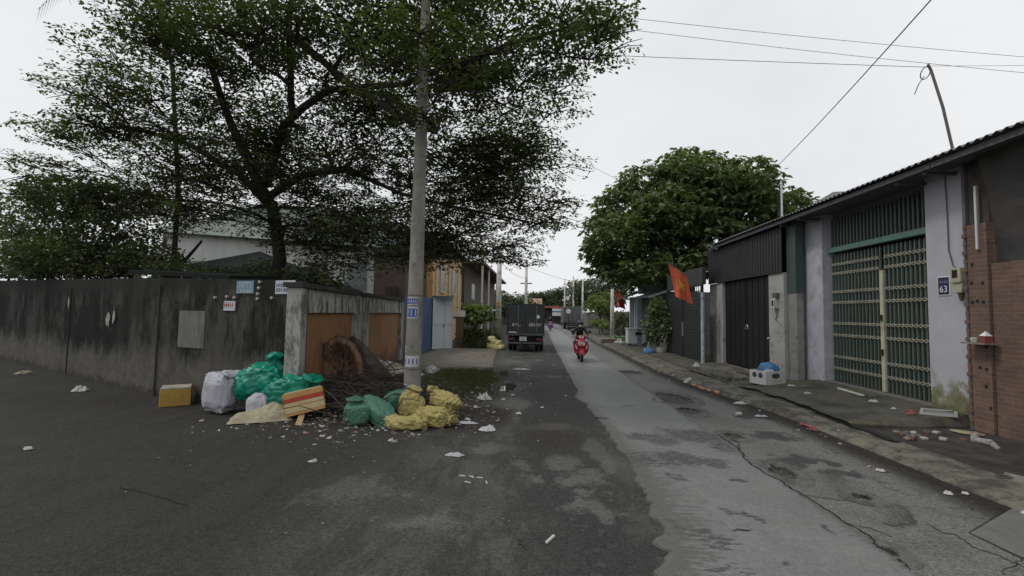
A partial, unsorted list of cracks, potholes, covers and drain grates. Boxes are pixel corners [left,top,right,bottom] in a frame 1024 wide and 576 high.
crack [714,432,910,569]
pothole [753,459,816,486]
pothole [650,390,705,408]
pothole [672,406,713,418]
